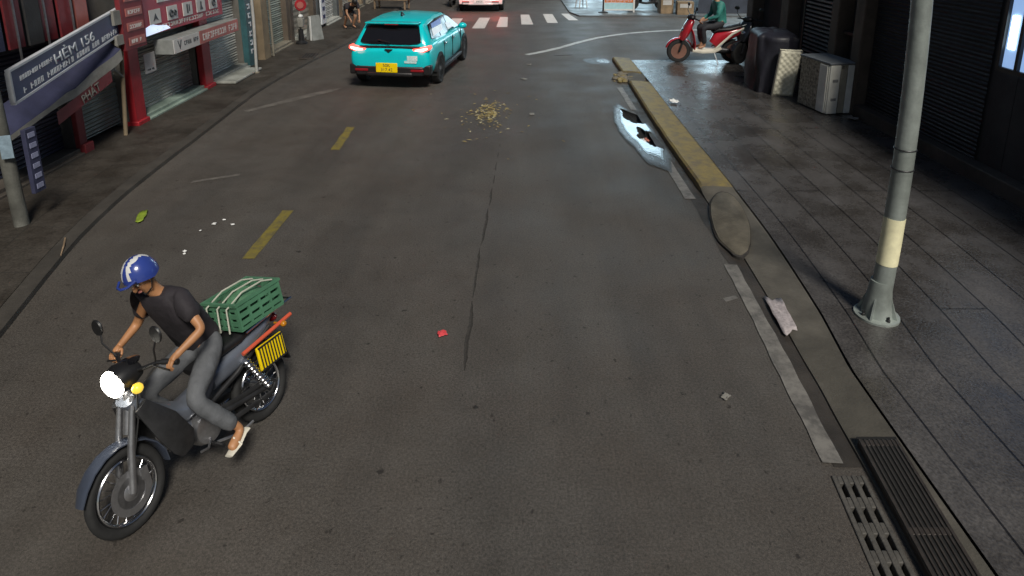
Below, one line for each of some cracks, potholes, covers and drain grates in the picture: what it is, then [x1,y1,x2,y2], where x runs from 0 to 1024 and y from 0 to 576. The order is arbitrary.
drain grate [831,476,916,576]
drain grate [856,437,981,576]
pothole [620,109,642,124]
crack [464,146,500,371]
pothole [637,128,657,147]
